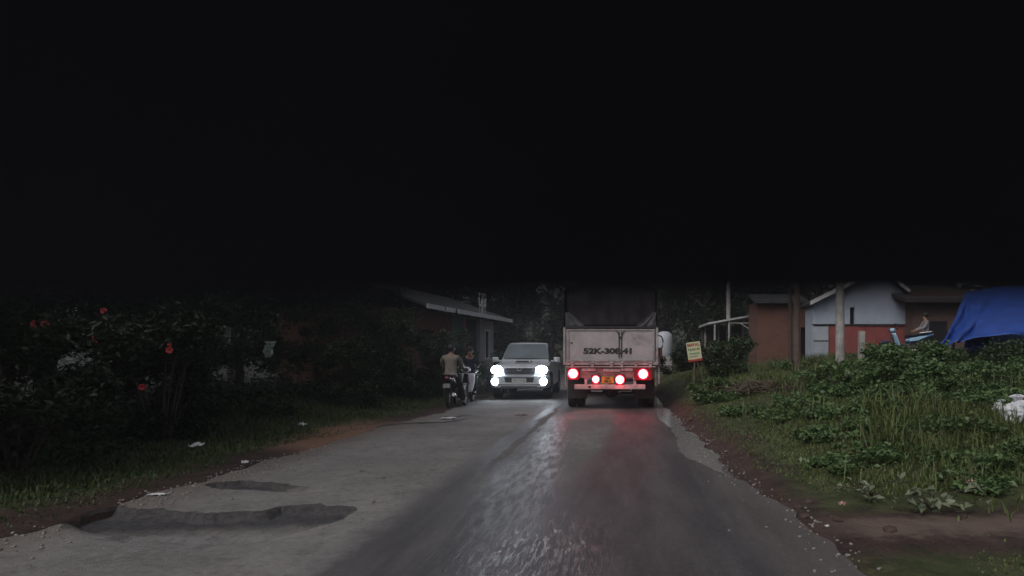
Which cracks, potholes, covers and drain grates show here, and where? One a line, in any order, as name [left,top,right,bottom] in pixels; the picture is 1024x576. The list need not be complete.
pothole [60,503,358,552]
pothole [205,480,332,495]
